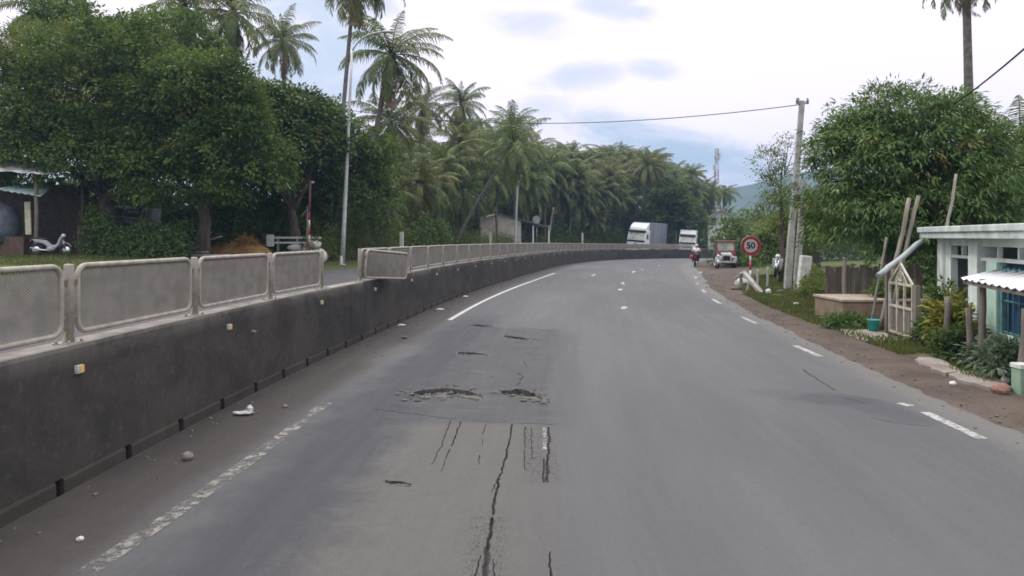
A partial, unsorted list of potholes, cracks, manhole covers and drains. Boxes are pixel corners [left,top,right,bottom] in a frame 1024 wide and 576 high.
pothole [492,387,550,405]
crack [431,421,461,471]
pothole [395,384,498,402]
crack [474,424,551,576]
